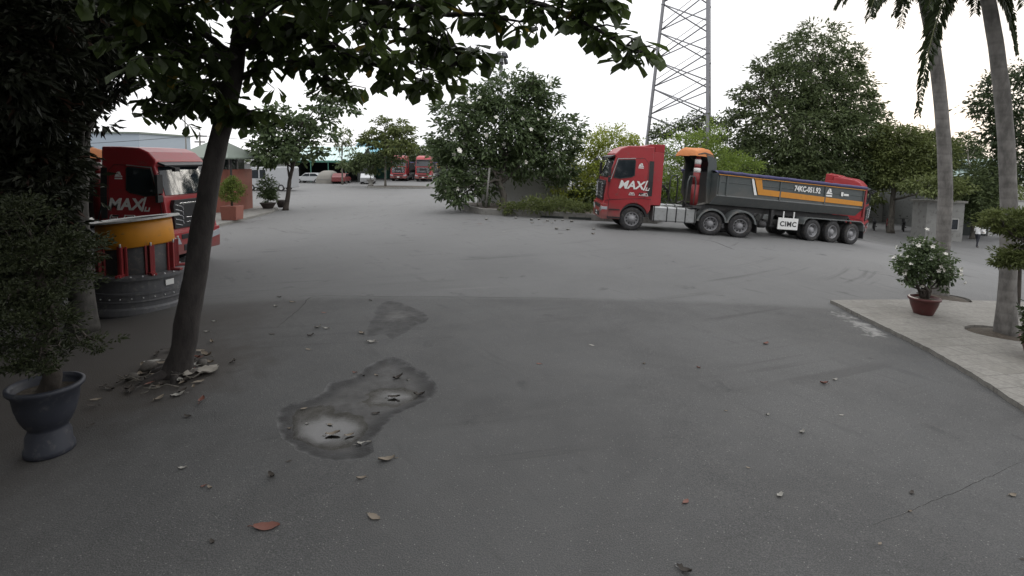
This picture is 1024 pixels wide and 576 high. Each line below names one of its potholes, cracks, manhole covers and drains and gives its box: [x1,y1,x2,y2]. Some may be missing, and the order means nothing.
crack [872,462,1021,526]
pothole [275,357,438,461]
